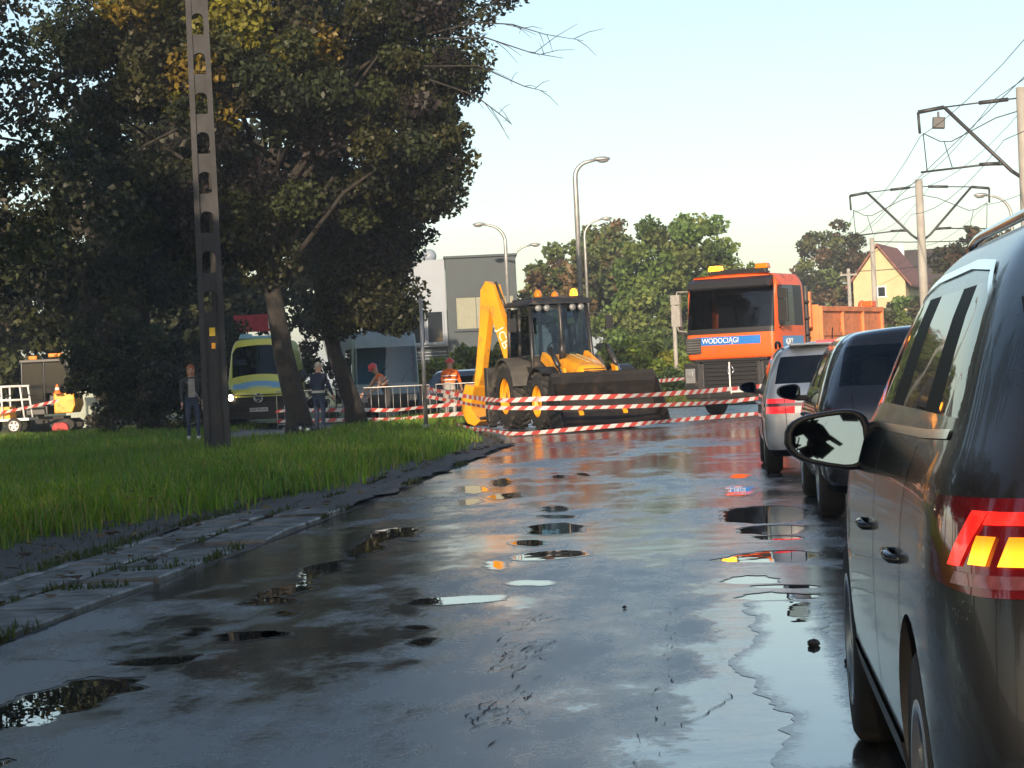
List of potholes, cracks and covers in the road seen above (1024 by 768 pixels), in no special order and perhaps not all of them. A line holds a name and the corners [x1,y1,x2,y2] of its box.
pothole [0,676,149,732]
pothole [108,654,204,666]
